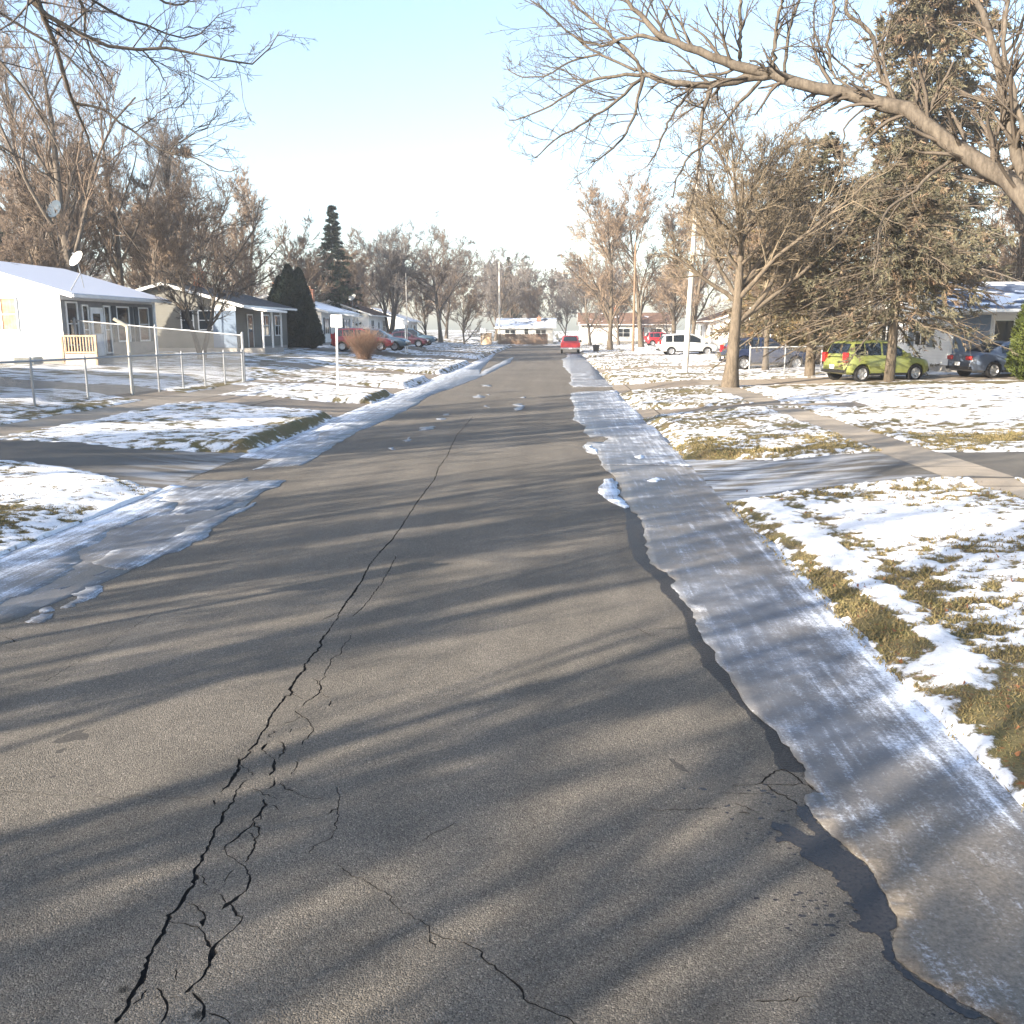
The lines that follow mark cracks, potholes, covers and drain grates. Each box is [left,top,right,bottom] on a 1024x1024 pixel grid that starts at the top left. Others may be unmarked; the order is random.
crack [648,769,814,814]
crack [338,864,575,1024]
crack [6,417,473,1024]
